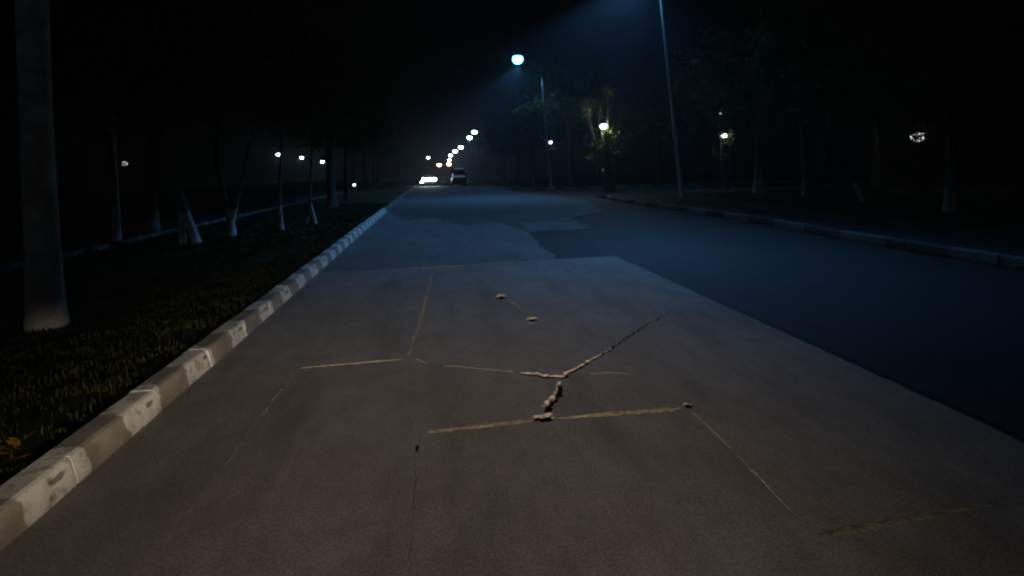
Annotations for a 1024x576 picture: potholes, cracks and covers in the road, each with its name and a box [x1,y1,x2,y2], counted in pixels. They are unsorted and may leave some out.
crack [145,260,672,571]
